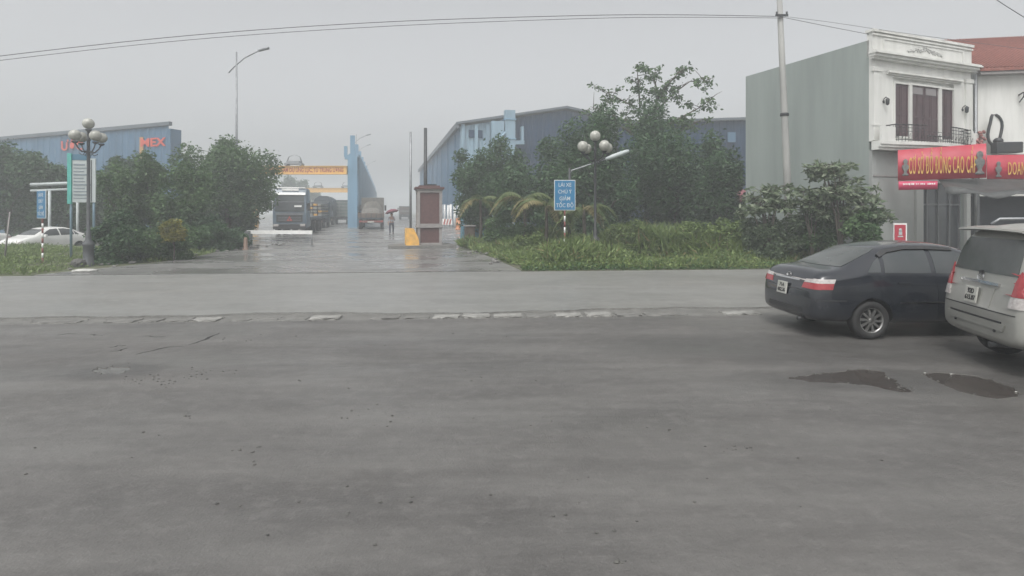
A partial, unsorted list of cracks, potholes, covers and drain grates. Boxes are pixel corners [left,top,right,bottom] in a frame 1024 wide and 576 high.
pothole [92,366,132,375]
crack [90,333,220,354]
